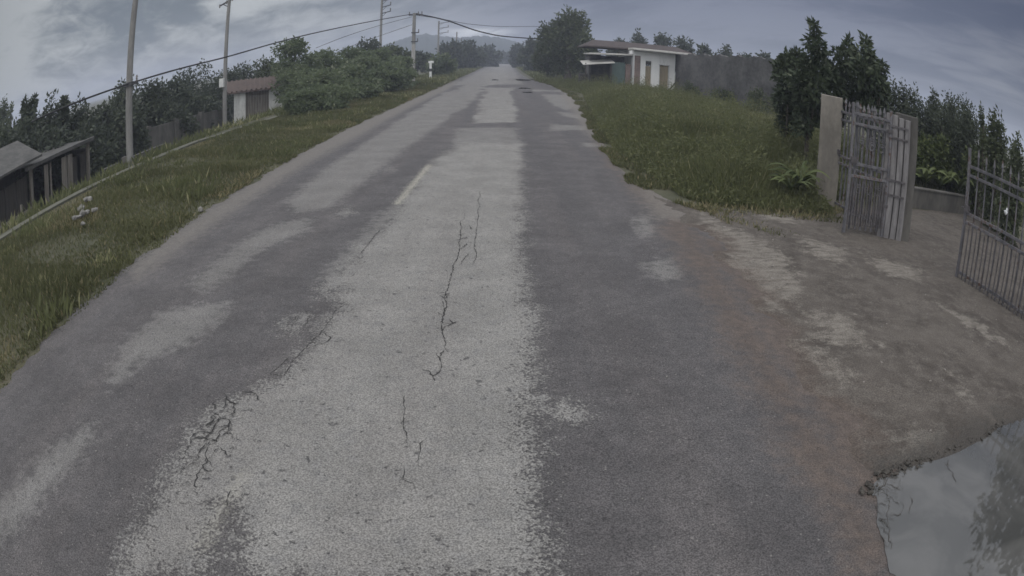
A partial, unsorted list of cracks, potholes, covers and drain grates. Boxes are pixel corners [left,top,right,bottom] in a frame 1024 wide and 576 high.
crack [180,391,259,507]
crack [422,192,481,381]
crack [403,395,421,487]
crack [270,306,342,375]
